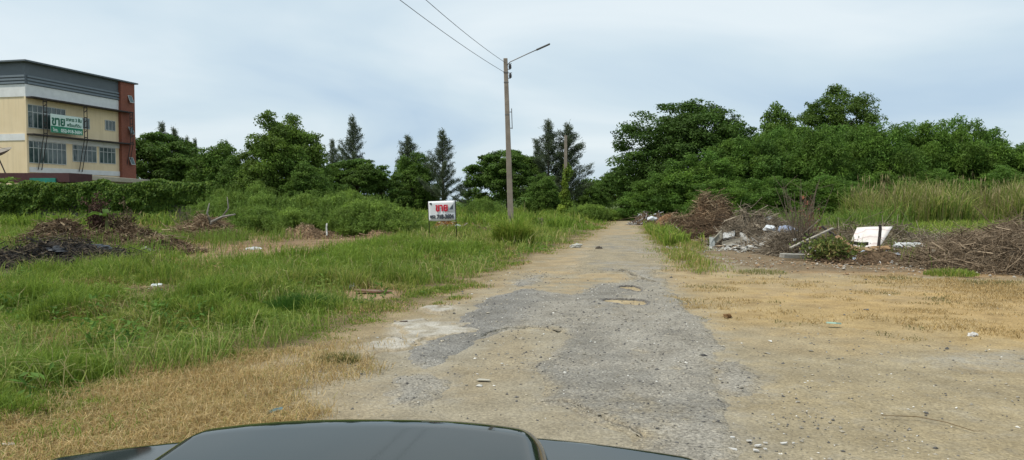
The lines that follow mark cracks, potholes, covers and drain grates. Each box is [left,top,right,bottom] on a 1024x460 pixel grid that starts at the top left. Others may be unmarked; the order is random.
pothole [600,298,650,306]
